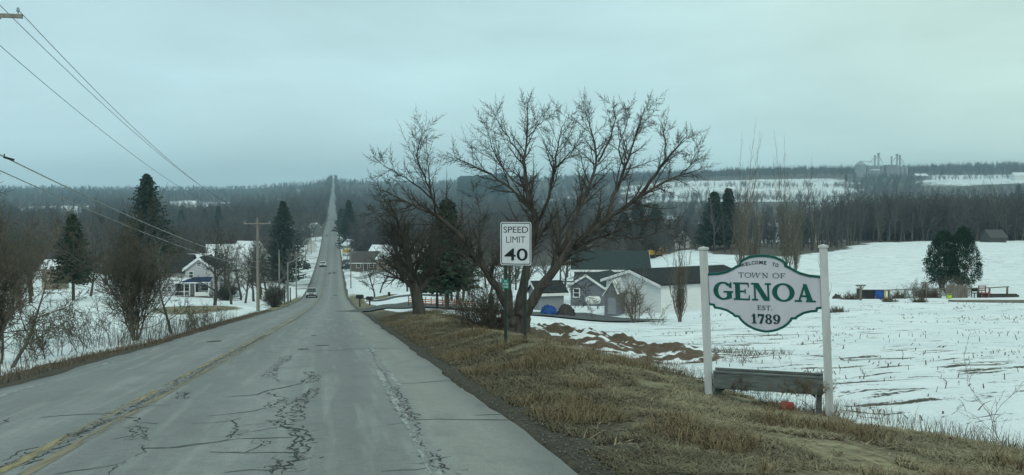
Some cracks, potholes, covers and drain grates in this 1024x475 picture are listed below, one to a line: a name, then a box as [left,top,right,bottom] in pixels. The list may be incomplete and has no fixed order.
crack [370,351,505,474]
crack [0,309,324,475]
